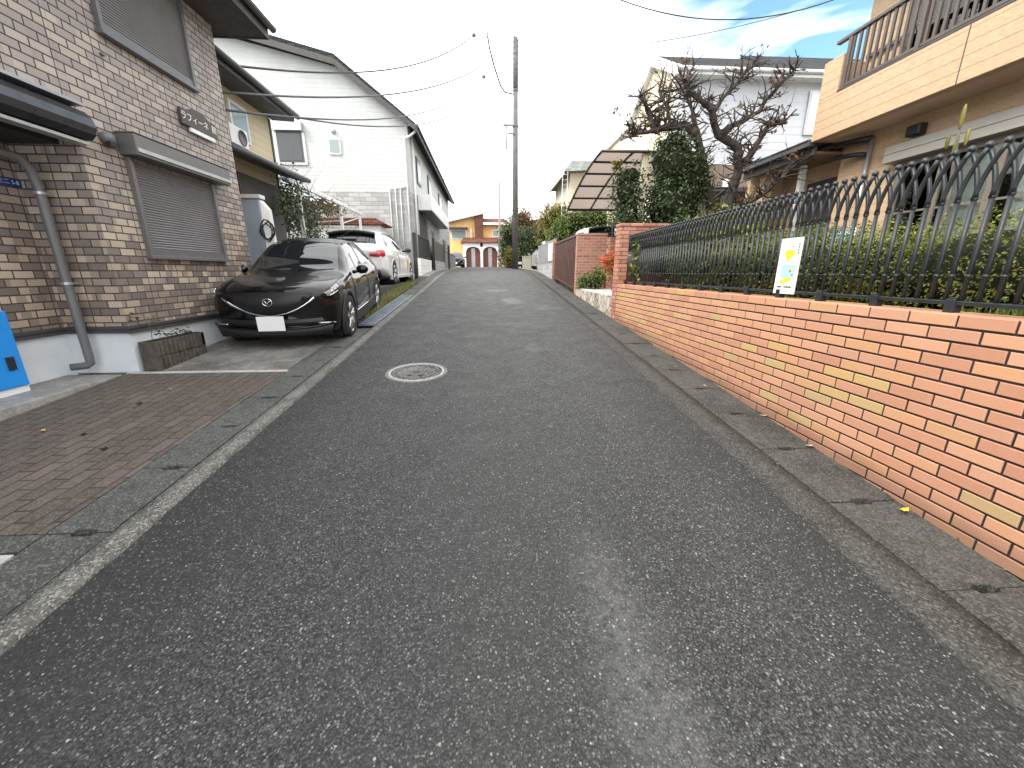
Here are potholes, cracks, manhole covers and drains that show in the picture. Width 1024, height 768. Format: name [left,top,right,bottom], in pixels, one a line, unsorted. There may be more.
manhole cover [385,363,447,383]
